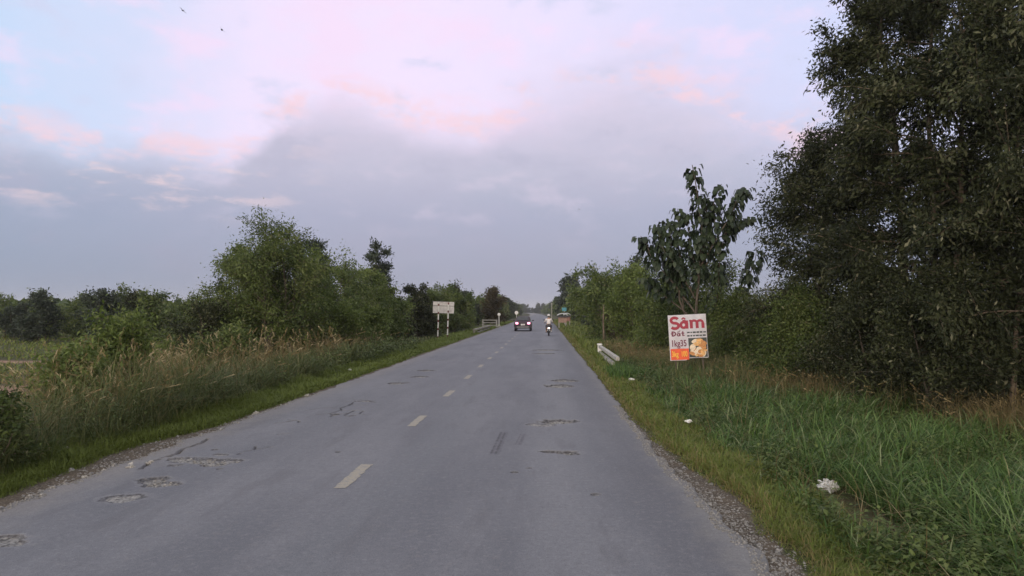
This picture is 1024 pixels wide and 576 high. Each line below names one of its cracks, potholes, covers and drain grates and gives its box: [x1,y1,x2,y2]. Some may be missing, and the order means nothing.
pothole [540,379,583,389]
pothole [518,418,594,427]
pothole [87,475,191,505]
crack [242,399,377,452]
crack [135,438,210,470]
pothole [158,453,253,468]
pothole [0,532,43,548]
